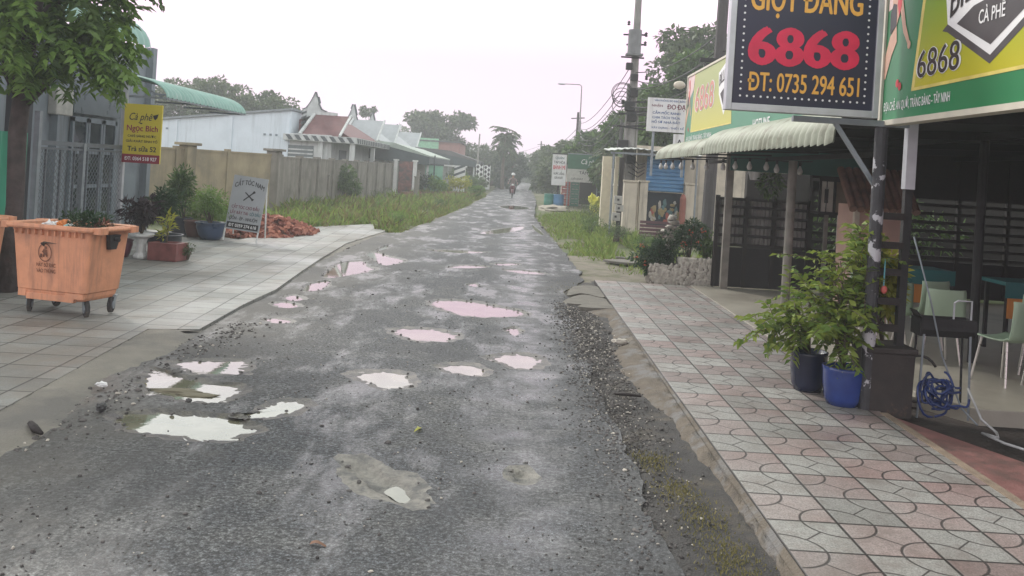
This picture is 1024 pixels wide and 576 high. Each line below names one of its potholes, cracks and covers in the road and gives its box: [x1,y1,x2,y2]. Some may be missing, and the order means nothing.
pothole [320,260,382,278]
pothole [480,226,524,234]
pothole [333,453,440,511]
pothole [502,461,542,486]
pothole [228,397,319,420]
pothole [340,369,422,391]
pothole [502,326,526,337]
pothole [161,357,259,376]
pothole [102,407,269,446]
pothole [127,365,253,404]
pothole [385,326,468,343]
pothole [479,352,551,370]
